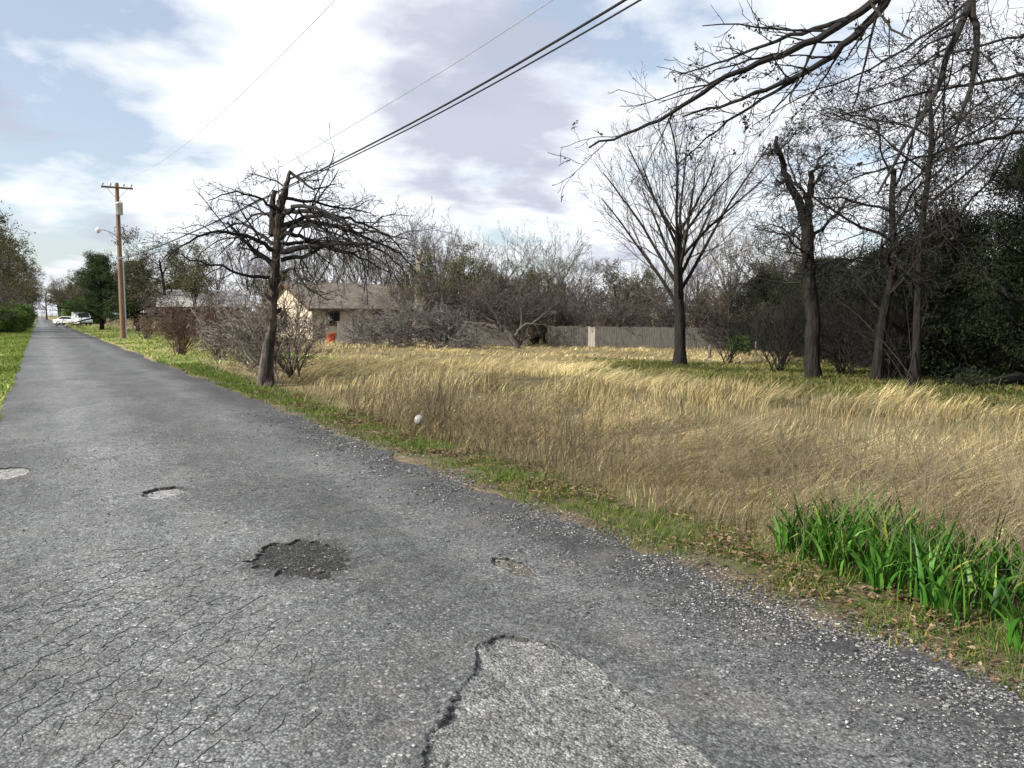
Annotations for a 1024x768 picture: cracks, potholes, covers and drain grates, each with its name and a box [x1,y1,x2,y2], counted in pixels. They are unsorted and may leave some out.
pothole [488,556,542,580]
pothole [238,538,356,582]
